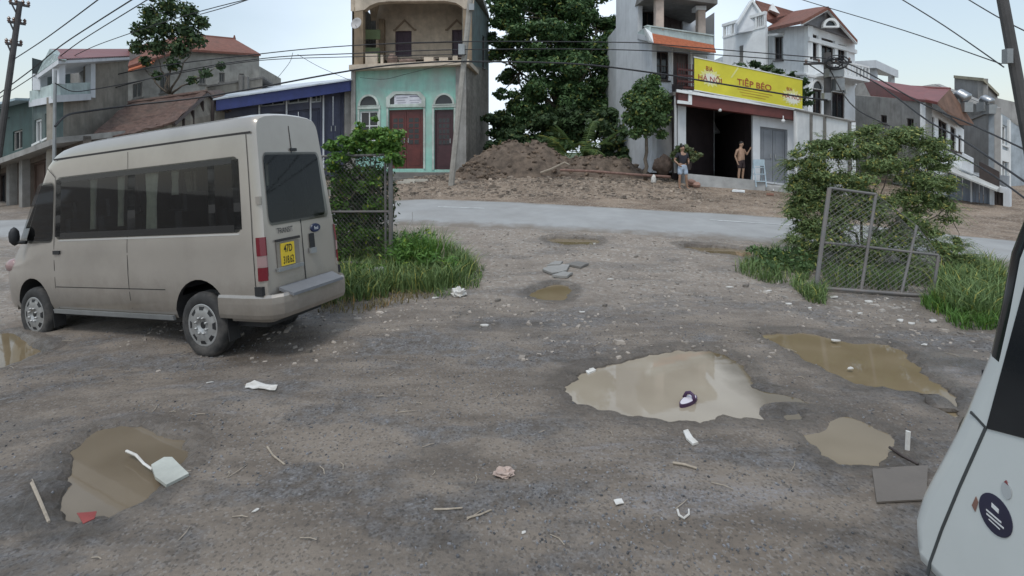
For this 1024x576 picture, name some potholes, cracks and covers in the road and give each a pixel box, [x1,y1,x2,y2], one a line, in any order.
pothole [759,402,921,478]
pothole [519,280,583,303]
pothole [745,326,974,424]
pothole [17,411,217,545]
pothole [546,342,839,435]
pothole [0,327,67,370]
pothole [670,241,759,259]
pothole [538,234,608,246]
